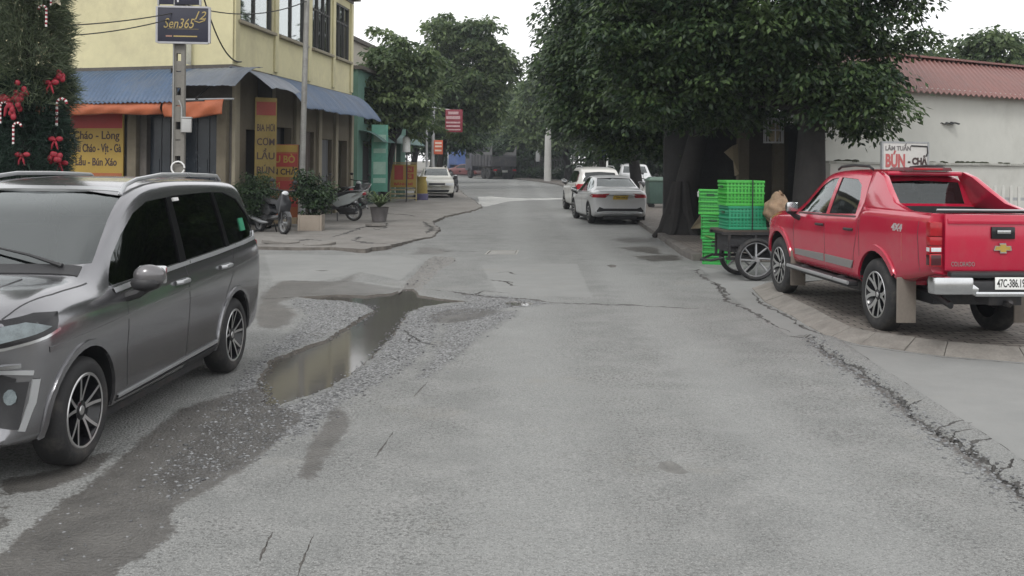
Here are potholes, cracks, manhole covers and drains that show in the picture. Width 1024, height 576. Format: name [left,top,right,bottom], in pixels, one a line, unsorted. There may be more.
crack [431,269,791,333]
pothole [256,289,467,406]
crack [259,532,273,561]
crack [298,535,314,575]
